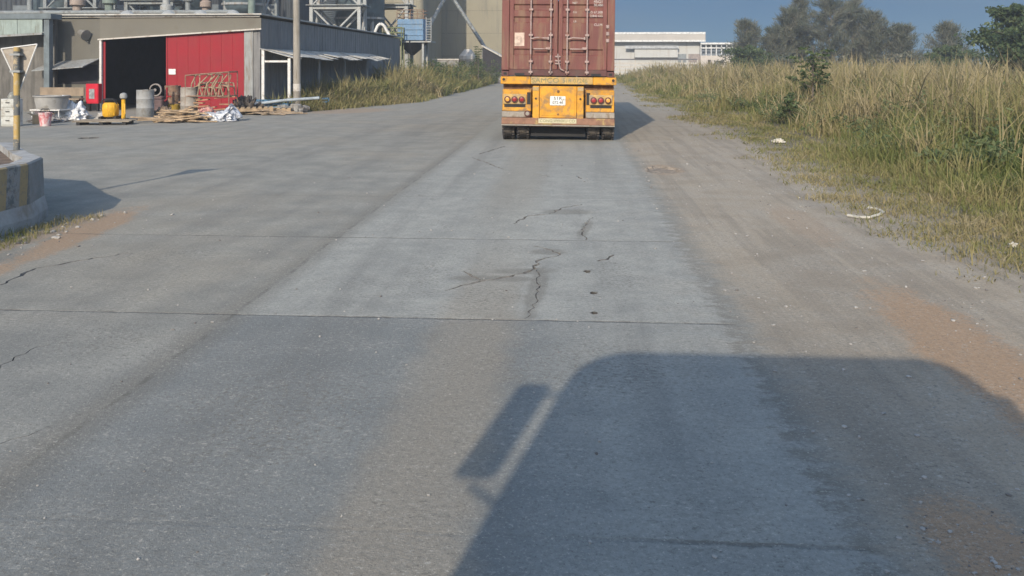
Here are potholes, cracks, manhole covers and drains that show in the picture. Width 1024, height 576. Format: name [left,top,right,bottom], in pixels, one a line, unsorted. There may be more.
crack [513,204,614,261]
crack [445,246,561,318]
crack [0,253,127,285]
